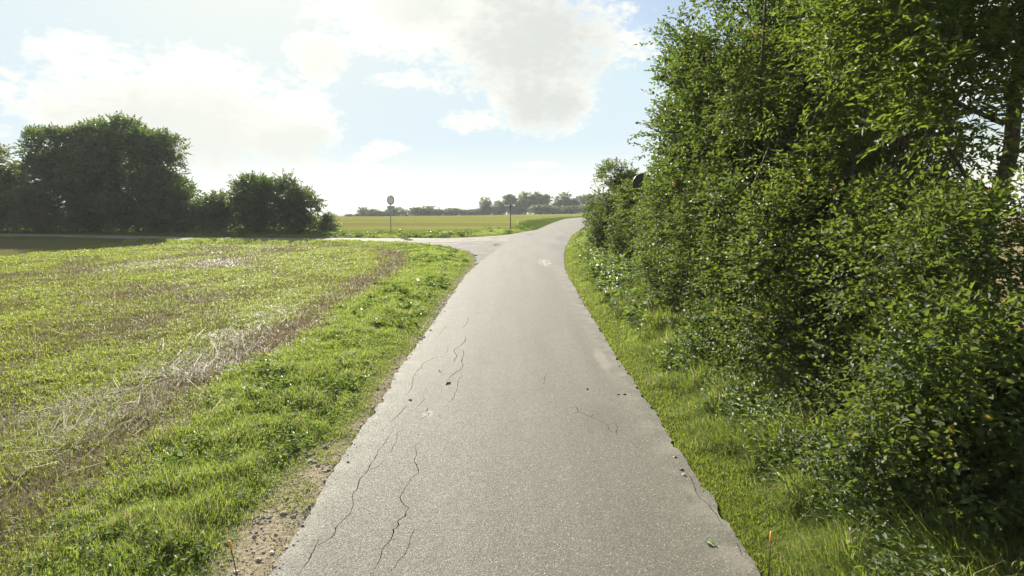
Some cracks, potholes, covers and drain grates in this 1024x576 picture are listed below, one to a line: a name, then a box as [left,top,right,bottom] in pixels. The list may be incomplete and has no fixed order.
crack [298,318,469,576]
